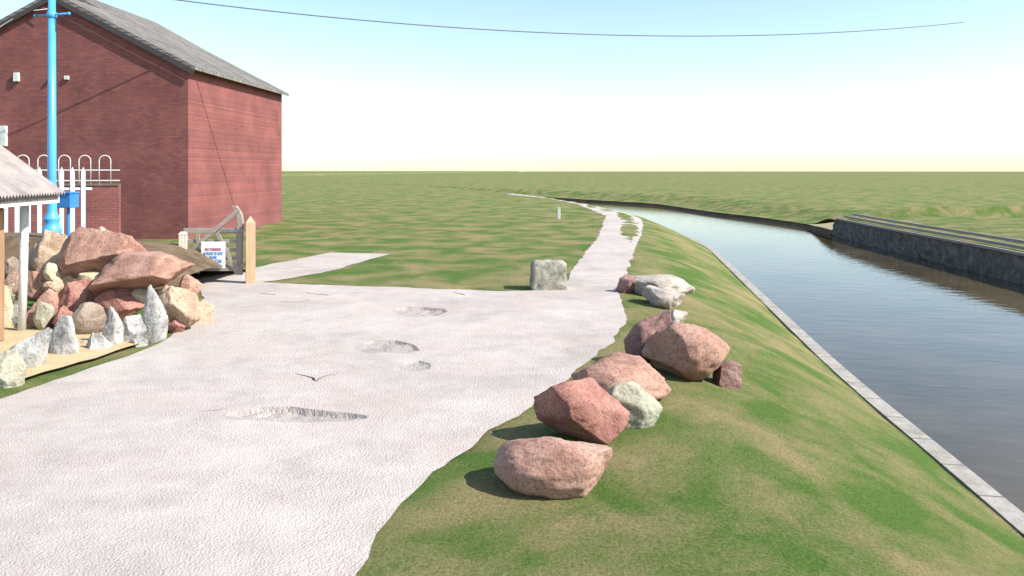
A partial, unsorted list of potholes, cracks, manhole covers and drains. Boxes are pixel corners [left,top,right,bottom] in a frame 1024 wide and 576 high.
pothole [397,360,432,372]
pothole [222,406,369,423]
pothole [392,306,448,317]
pothole [356,340,420,353]
